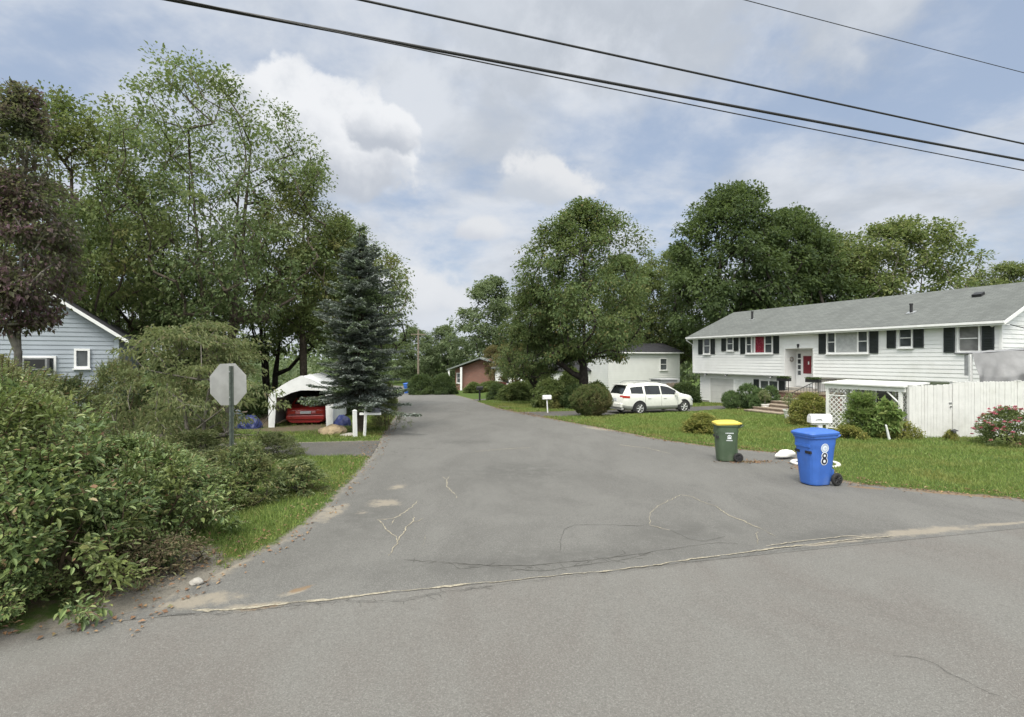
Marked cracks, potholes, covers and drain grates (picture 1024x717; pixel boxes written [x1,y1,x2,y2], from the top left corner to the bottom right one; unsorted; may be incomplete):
crack [413,494,773,572]
crack [378,501,426,556]
